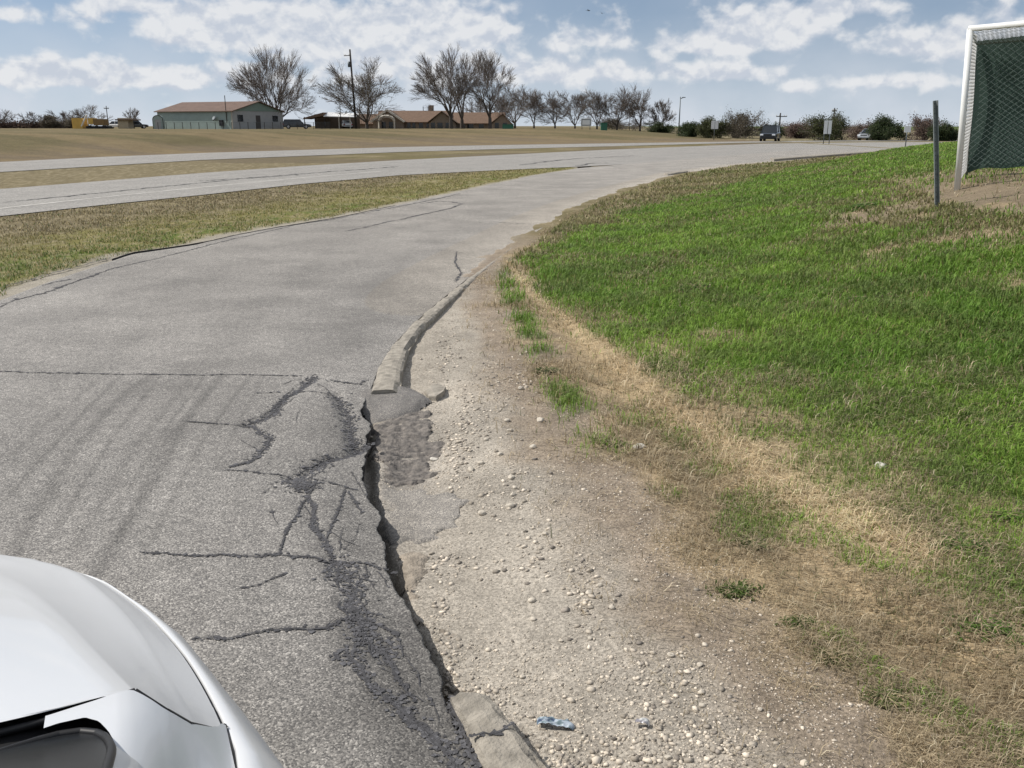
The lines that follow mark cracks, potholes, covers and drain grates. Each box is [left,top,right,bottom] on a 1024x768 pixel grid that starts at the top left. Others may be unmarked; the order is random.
crack [0,194,461,307]
crack [139,375,515,768]
